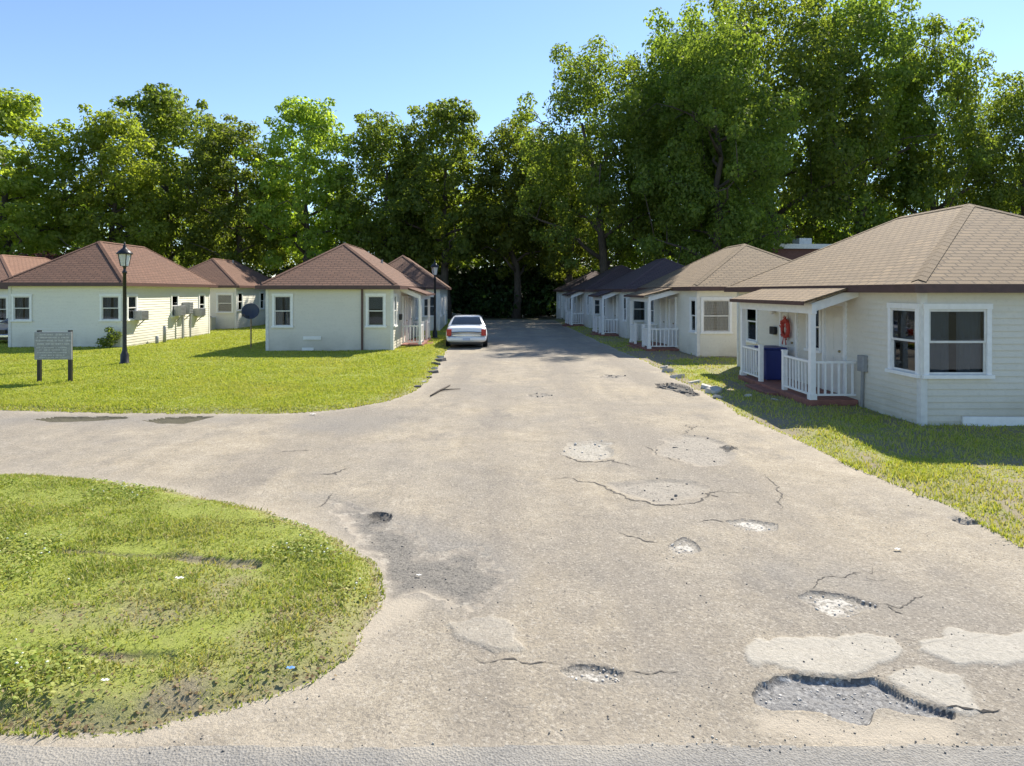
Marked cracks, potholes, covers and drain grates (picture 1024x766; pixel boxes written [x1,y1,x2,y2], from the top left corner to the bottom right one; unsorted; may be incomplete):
pothole [655,383,700,397]
pothole [797,590,879,618]
pothole [560,664,625,686]
pothole [947,516,989,526]
pothole [726,519,778,532]
pothole [752,674,956,726]
pothole [668,537,702,554]
